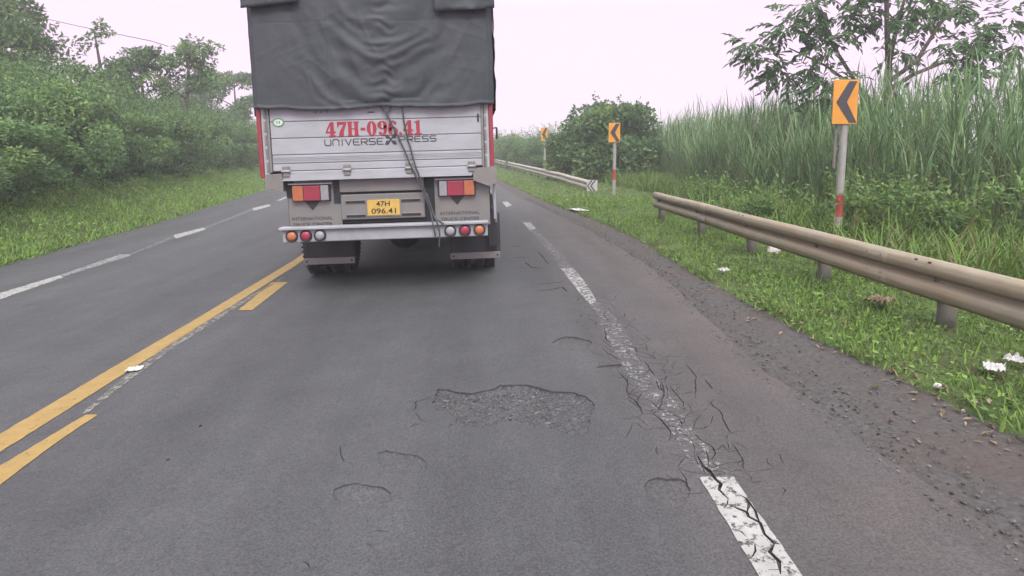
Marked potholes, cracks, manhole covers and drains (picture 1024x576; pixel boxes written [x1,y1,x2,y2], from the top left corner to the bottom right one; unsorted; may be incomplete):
pothole [432,384,595,435]
pothole [644,477,690,509]
crack [516,246,567,292]
pothole [332,483,391,505]
crack [574,293,803,576]
pothole [378,450,427,477]
